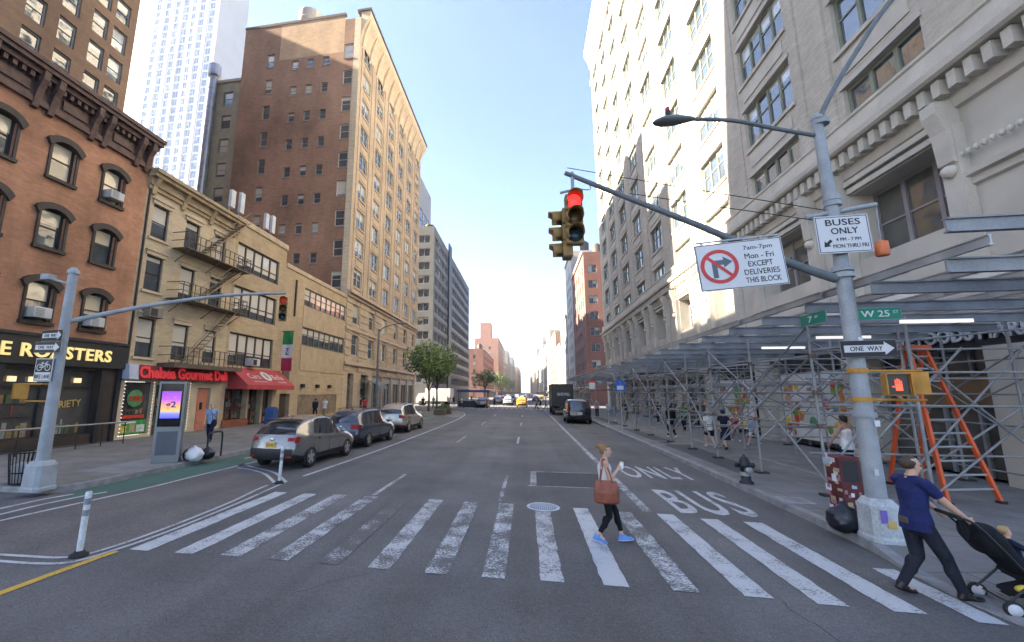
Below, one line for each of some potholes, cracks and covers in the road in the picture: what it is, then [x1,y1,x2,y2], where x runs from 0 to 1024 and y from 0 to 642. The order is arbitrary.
manhole cover [527,502,560,511]
